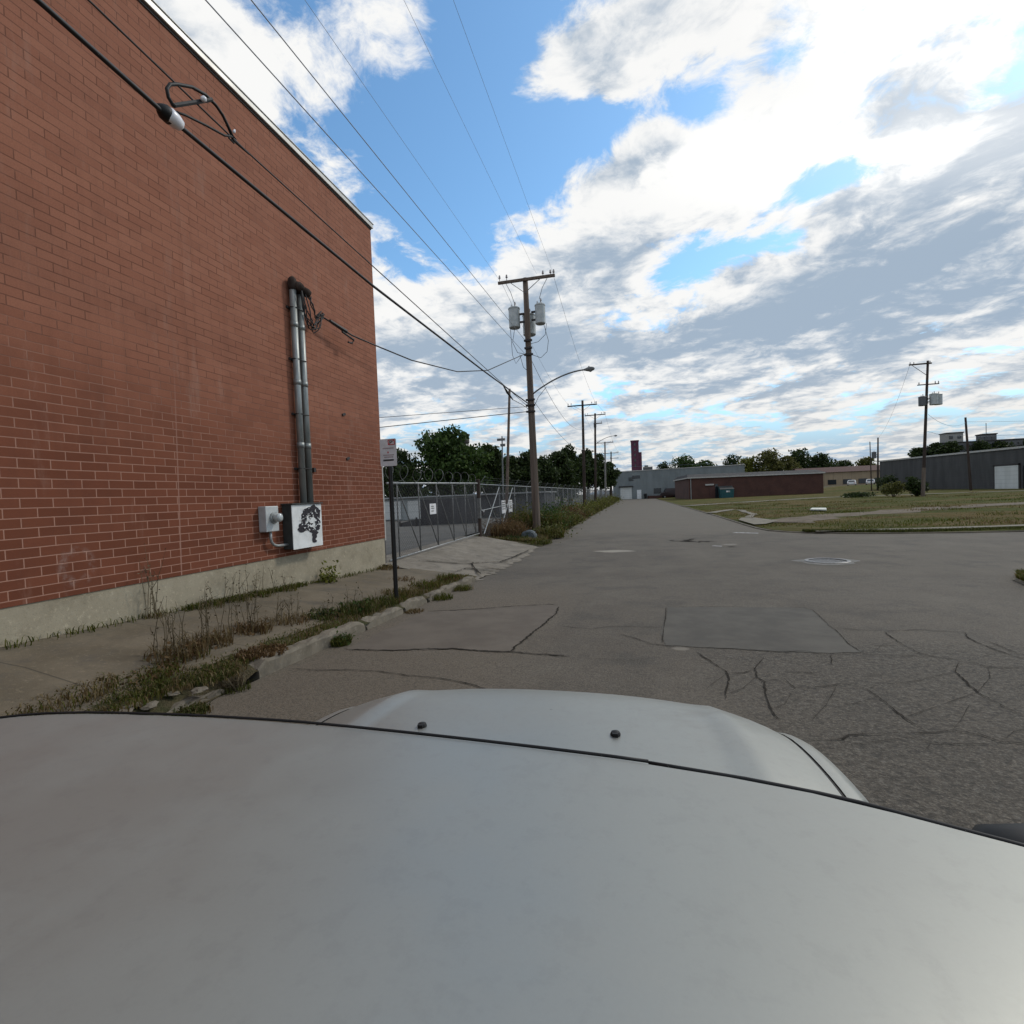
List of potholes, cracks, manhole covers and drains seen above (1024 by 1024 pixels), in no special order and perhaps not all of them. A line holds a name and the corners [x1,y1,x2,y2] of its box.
crack [296,668,486,689]
crack [563,606,860,719]
crack [786,628,1024,763]
crack [426,550,529,574]
